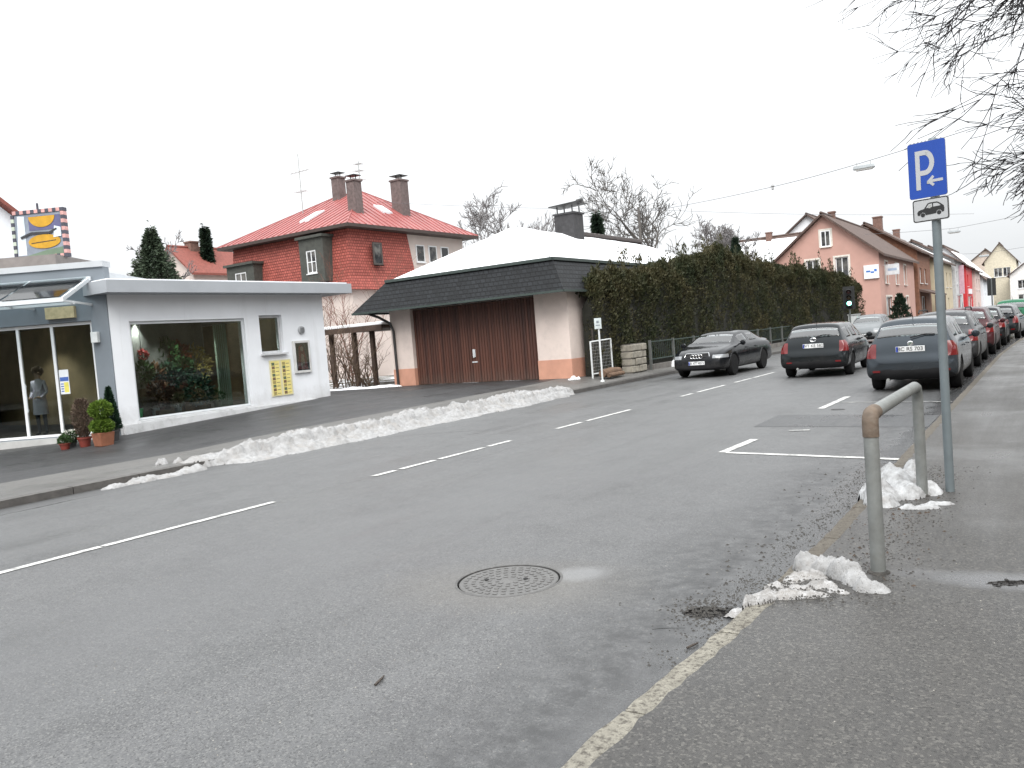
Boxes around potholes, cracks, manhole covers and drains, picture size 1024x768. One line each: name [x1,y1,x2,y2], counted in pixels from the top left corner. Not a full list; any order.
manhole cover [454,564,563,597]
pothole [987,578,1024,587]
pothole [681,606,734,619]
